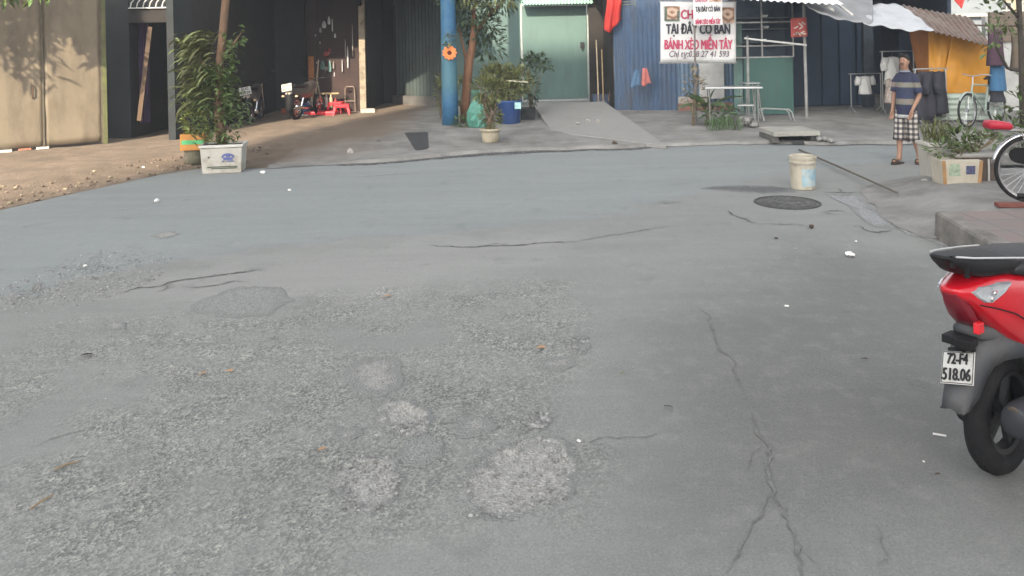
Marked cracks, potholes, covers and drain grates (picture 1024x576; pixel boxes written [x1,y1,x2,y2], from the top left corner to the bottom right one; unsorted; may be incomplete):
crack [123,269,265,293]
crack [699,308,745,388]
crack [429,226,669,247]
crack [709,411,821,576]
pothole [452,435,579,526]
manhole cover [754,196,822,210]
pothole [329,453,403,517]
crack [728,210,891,234]
crack [589,433,662,442]
pothole [372,400,435,438]
